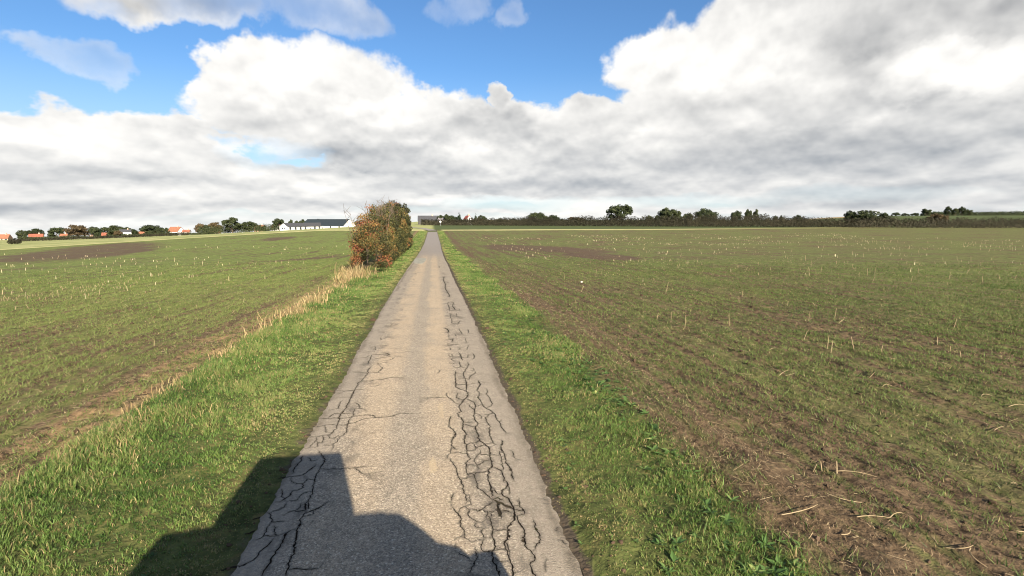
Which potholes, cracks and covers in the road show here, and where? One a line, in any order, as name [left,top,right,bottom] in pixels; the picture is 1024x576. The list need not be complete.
crack [440,353,565,576]
